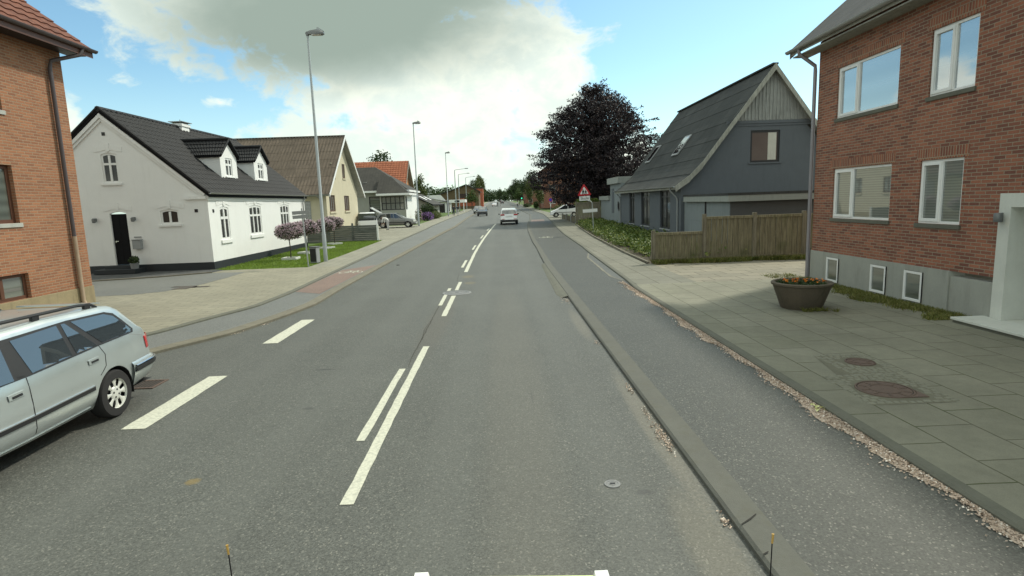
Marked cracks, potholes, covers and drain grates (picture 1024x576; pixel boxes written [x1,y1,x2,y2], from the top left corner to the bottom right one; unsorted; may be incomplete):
manhole cover [854,381,930,398]
drain grate [134,379,169,389]
manhole cover [604,480,621,488]
manhole cover [844,358,876,366]
